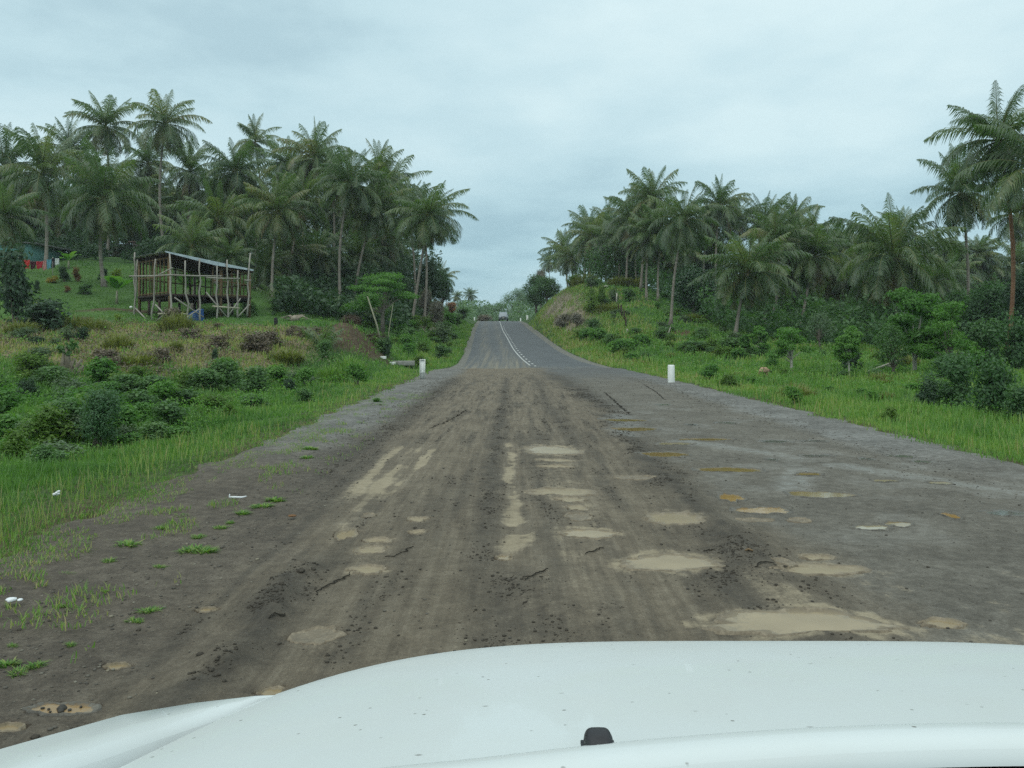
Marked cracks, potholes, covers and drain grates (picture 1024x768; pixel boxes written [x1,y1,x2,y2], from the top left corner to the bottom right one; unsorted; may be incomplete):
pothole [701,607,910,638]
pothole [20,701,102,717]
pothole [917,616,968,629]
crack [316,572,350,595]
pothole [618,552,726,572]
pothole [287,624,347,645]
pothole [769,562,872,577]
pothole [522,445,584,455]
pothole [643,512,706,526]
pothole [782,490,863,499]
